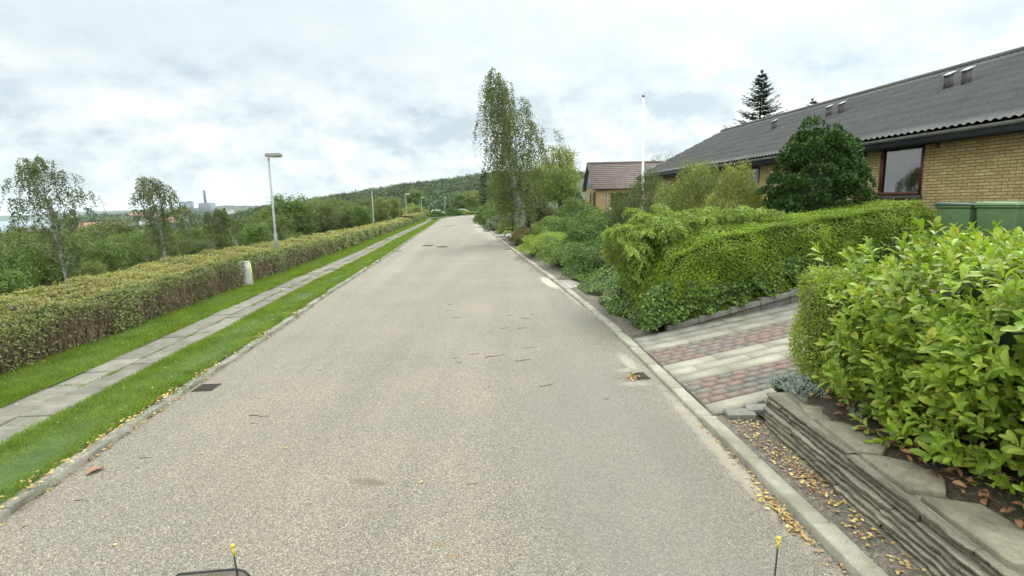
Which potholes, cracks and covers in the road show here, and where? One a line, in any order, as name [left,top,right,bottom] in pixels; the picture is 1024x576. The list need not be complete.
drain grate [191,383,222,392]
drain grate [627,372,651,380]
